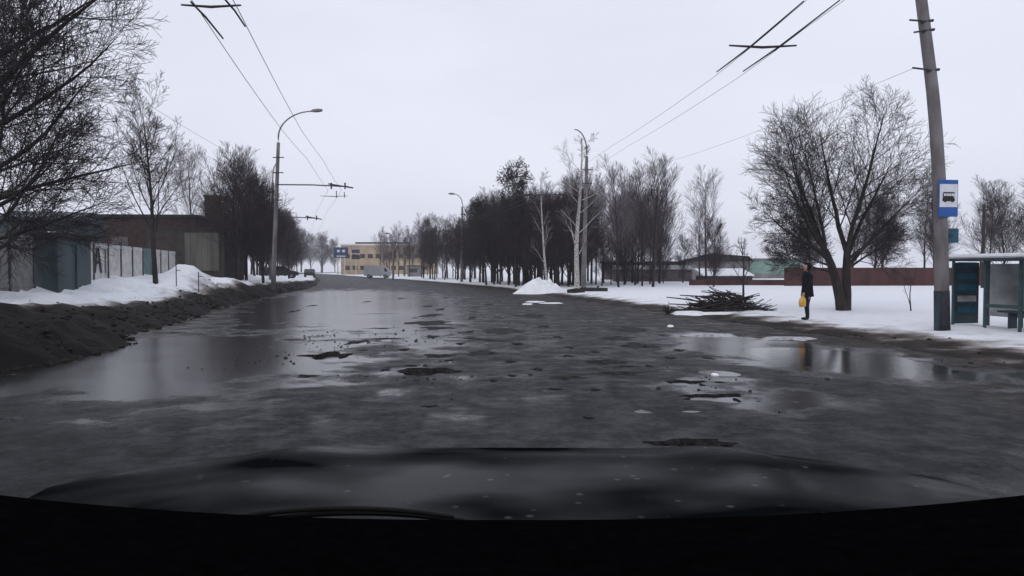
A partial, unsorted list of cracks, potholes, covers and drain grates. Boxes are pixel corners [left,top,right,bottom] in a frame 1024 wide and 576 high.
pothole [297,351,353,361]
pothole [680,393,742,403]
pothole [397,368,463,376]
pothole [643,438,739,447]
